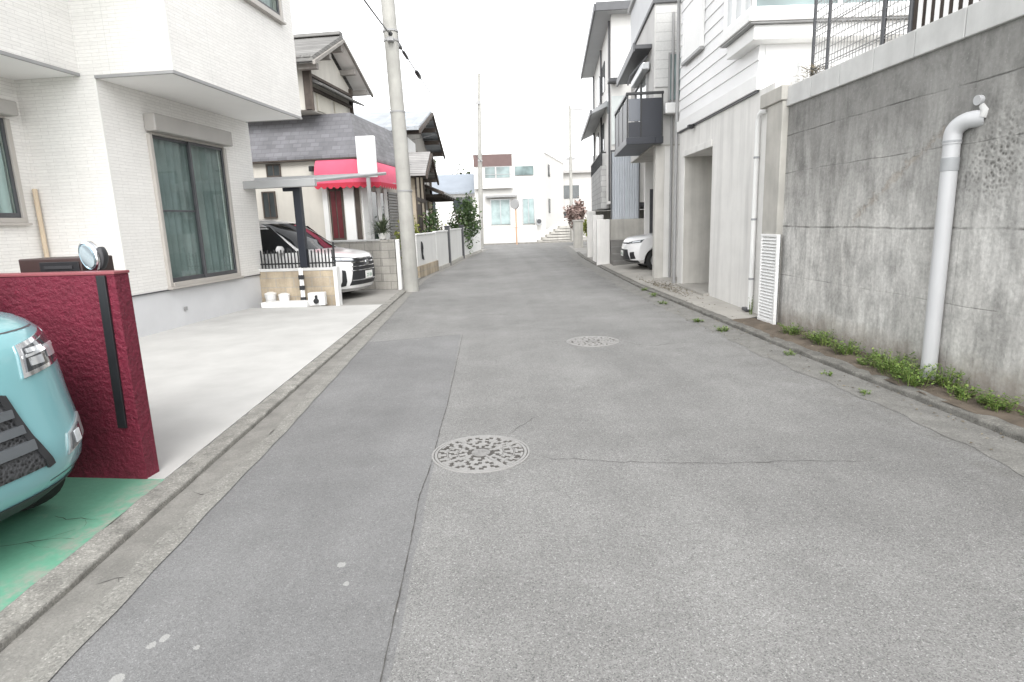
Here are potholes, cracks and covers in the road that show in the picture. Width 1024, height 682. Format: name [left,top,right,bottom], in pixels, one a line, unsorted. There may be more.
manhole cover [566,336,619,347]
crack [535,454,867,463]
manhole cover [432,435,530,473]
crack [6,513,88,546]
